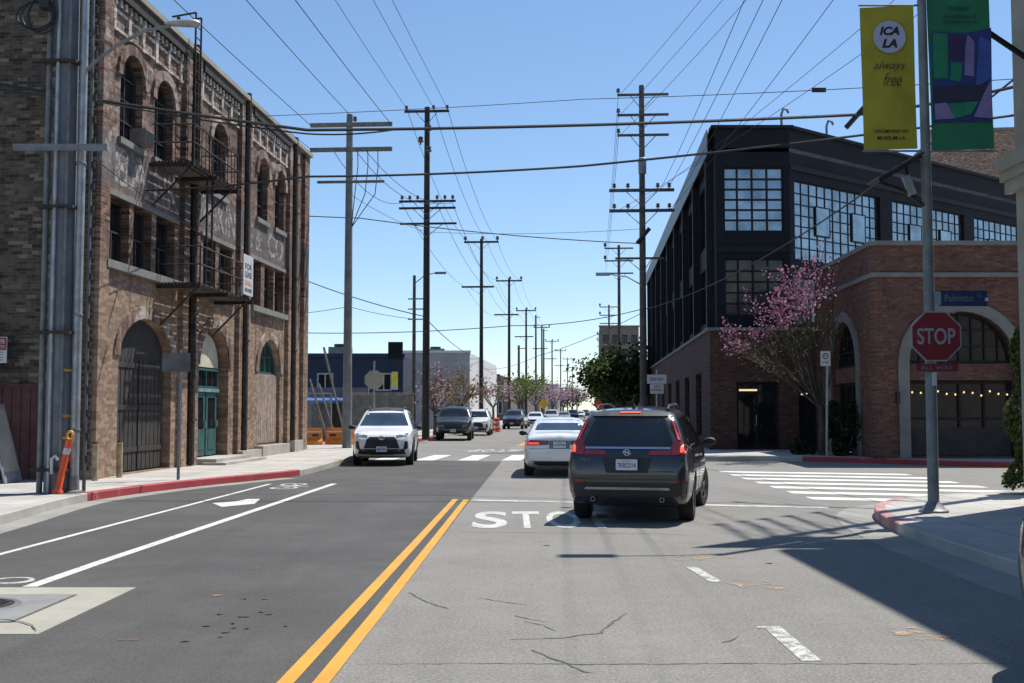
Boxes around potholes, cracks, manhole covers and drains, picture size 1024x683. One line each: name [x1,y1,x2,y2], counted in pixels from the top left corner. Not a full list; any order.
crack [483,598,627,673]
manhole cover [0,597,22,610]
